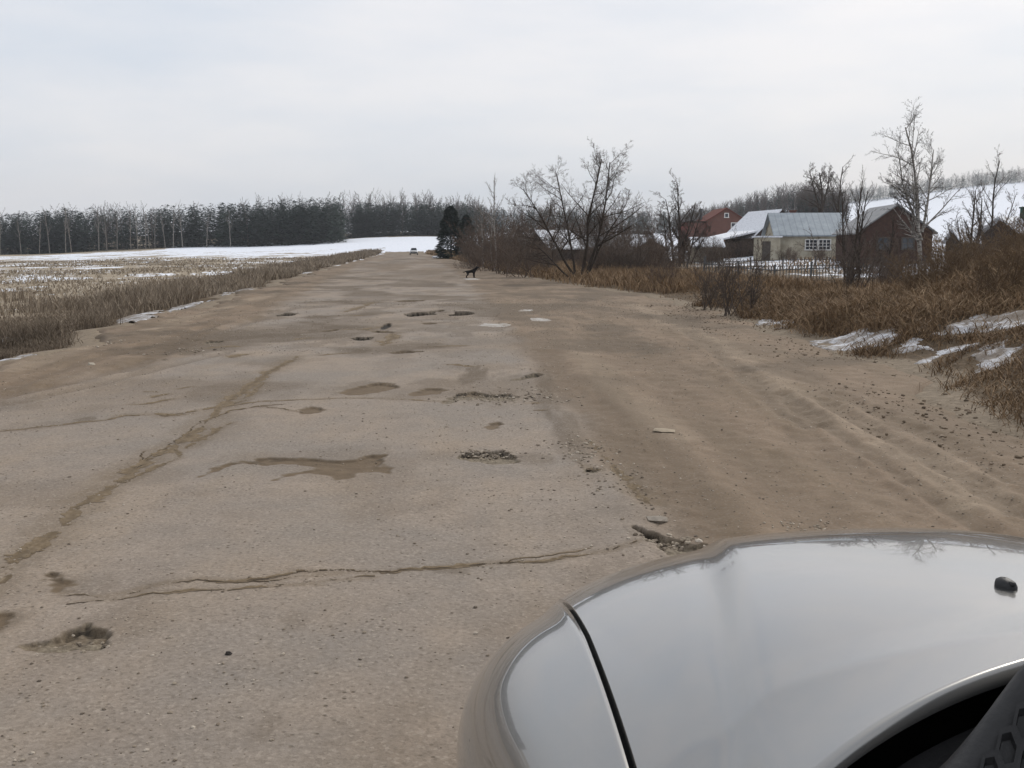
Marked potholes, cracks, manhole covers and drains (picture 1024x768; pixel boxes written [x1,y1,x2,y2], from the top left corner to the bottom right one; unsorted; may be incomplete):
pothole [285,404,336,416]
pothole [447,448,534,468]
crack [0,338,440,584]
pothole [6,620,124,660]
pothole [503,372,554,382]
pothole [394,309,455,318]
pothole [473,420,514,432]
pothole [623,523,712,558]
pothole [188,451,405,484]
pothole [429,390,524,406]
pothole [325,381,411,397]
crack [61,540,637,604]
